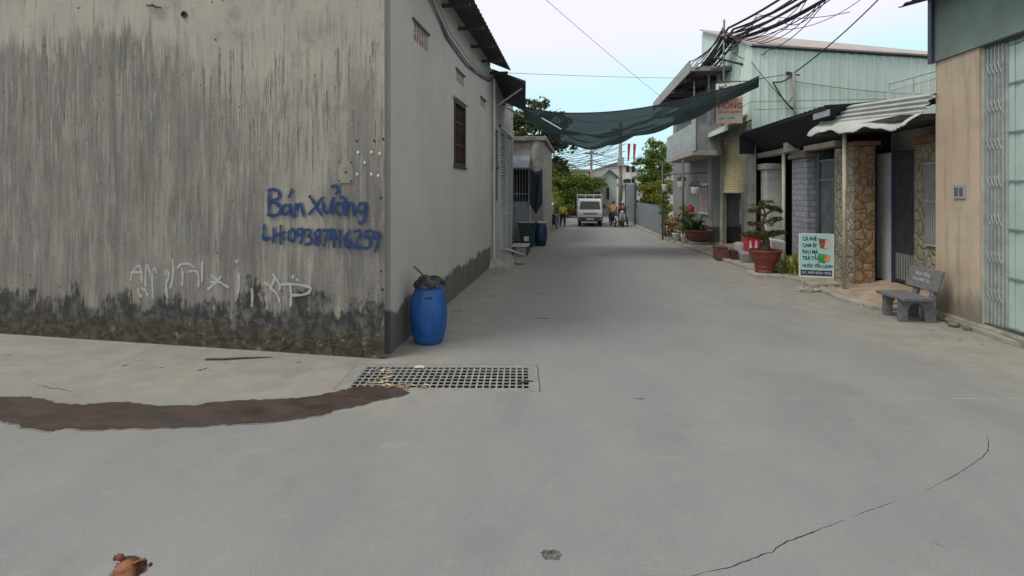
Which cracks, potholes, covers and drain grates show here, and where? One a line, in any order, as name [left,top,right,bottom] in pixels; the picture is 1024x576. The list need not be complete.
drain grate [333,364,540,391]
crack [693,435,989,576]
pothole [540,549,562,561]
